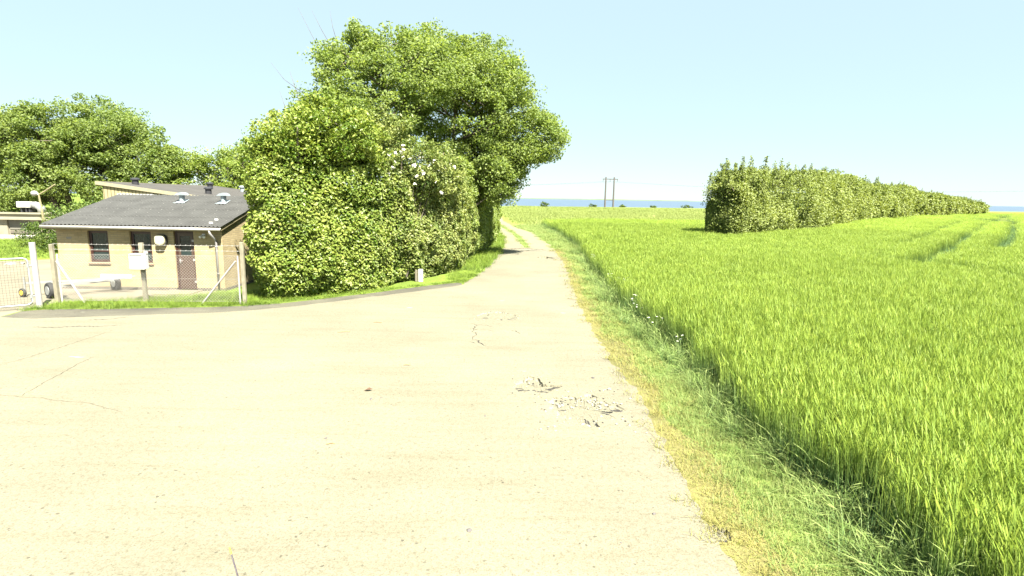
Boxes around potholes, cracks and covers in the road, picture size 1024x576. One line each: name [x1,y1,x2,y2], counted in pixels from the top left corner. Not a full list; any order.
crack [4,395,122,412]
pothole [534,389,651,434]
pothole [512,375,562,393]
